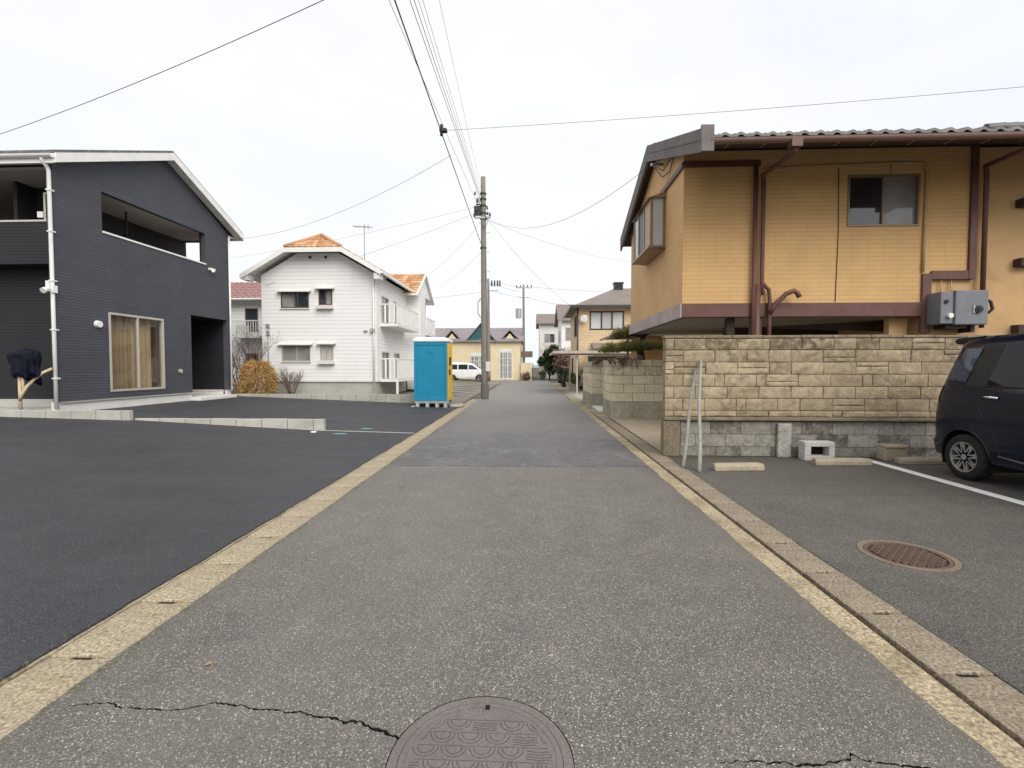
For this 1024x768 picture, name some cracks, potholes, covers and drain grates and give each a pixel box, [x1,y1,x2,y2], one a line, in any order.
crack [722,753,930,768]
manhole cover [856,540,962,572]
manhole cover [386,697,574,768]
crack [71,702,399,744]
